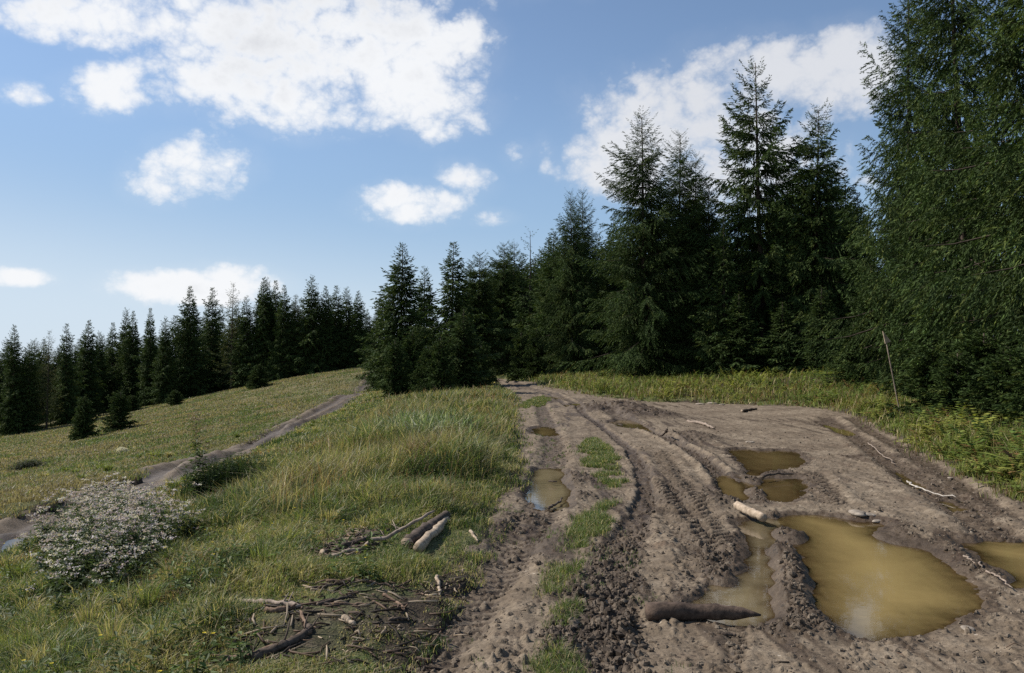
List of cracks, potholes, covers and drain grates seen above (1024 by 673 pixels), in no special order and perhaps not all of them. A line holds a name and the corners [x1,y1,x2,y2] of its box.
pothole [755,471,821,503]
pothole [512,466,589,512]
pothole [766,507,1009,645]
pothole [523,425,562,437]
pothole [711,471,763,504]
pothole [722,446,816,476]
pothole [931,529,1024,591]
